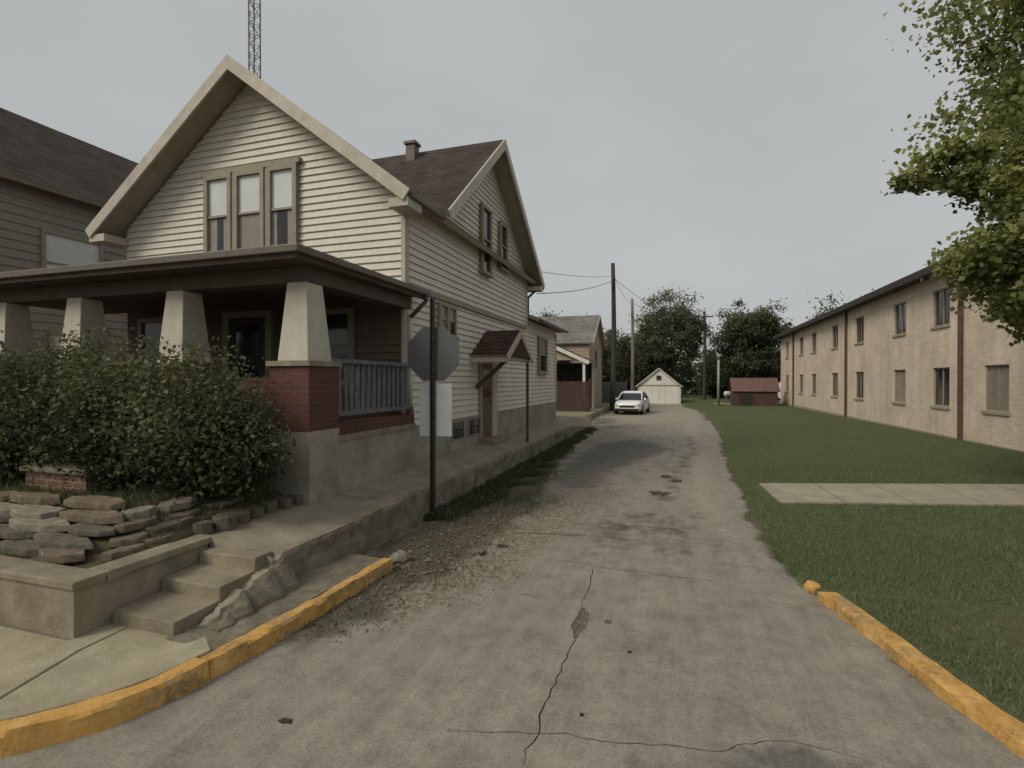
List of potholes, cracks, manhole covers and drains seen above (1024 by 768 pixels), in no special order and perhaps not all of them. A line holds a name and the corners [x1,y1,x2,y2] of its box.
crack [450,560,872,763]
pothole [571,607,593,639]
